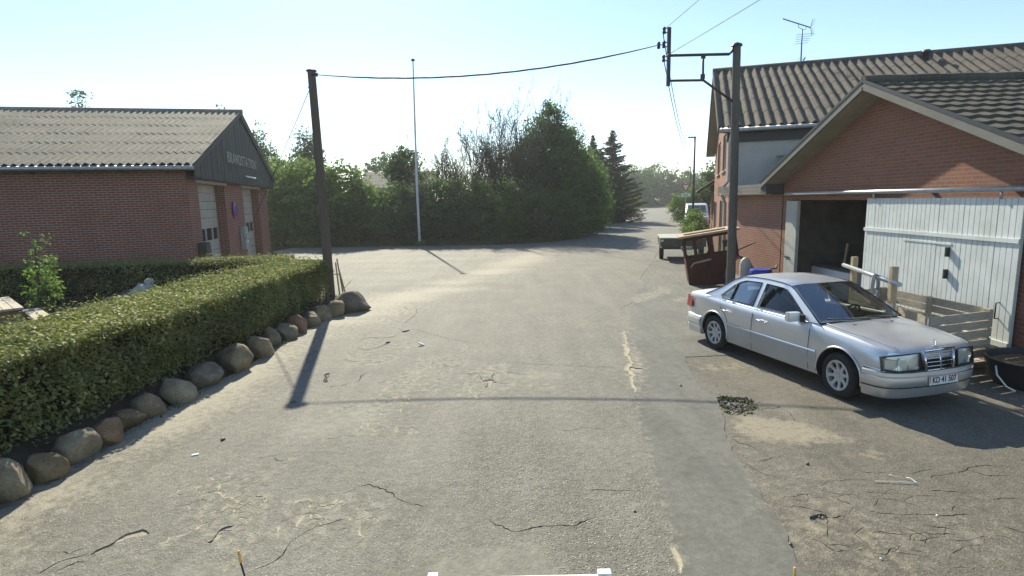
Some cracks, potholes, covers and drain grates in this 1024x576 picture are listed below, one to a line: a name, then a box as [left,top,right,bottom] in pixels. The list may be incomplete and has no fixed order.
crack [783,465,1024,568]
crack [35,546,89,575]
crack [150,455,421,574]
crack [490,517,598,532]
